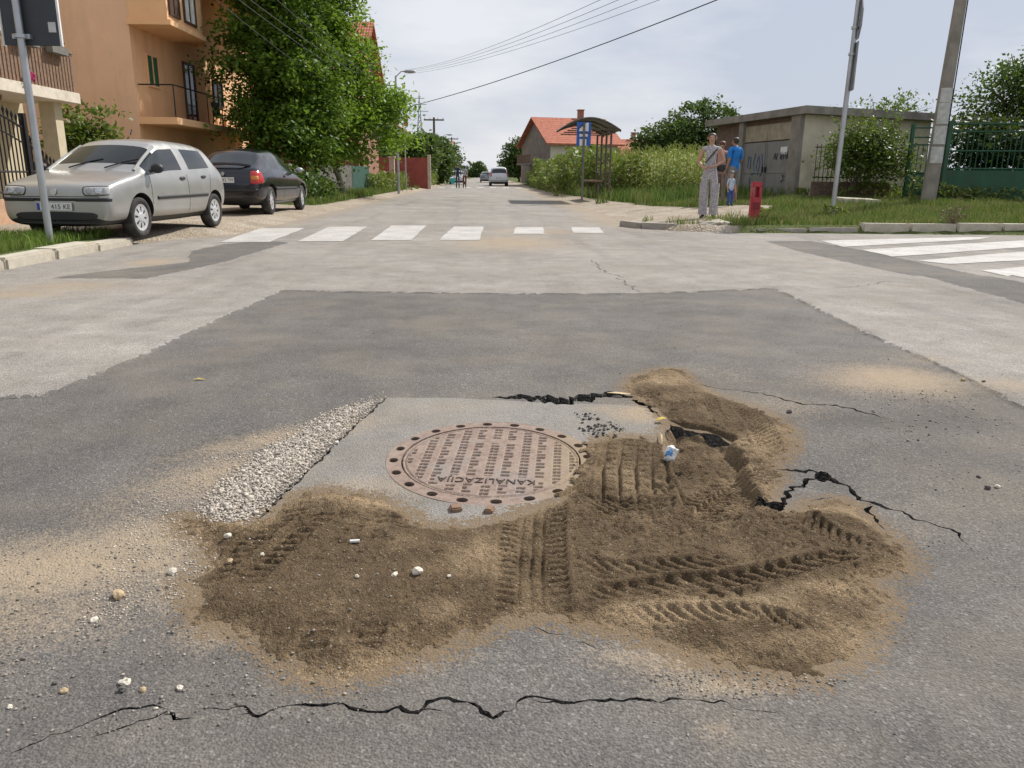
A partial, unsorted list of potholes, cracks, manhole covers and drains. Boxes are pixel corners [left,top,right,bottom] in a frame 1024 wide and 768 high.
manhole cover [386,422,592,505]
crack [778,469,967,544]
crack [704,385,894,420]
crack [493,391,659,429]
crack [6,695,779,755]
